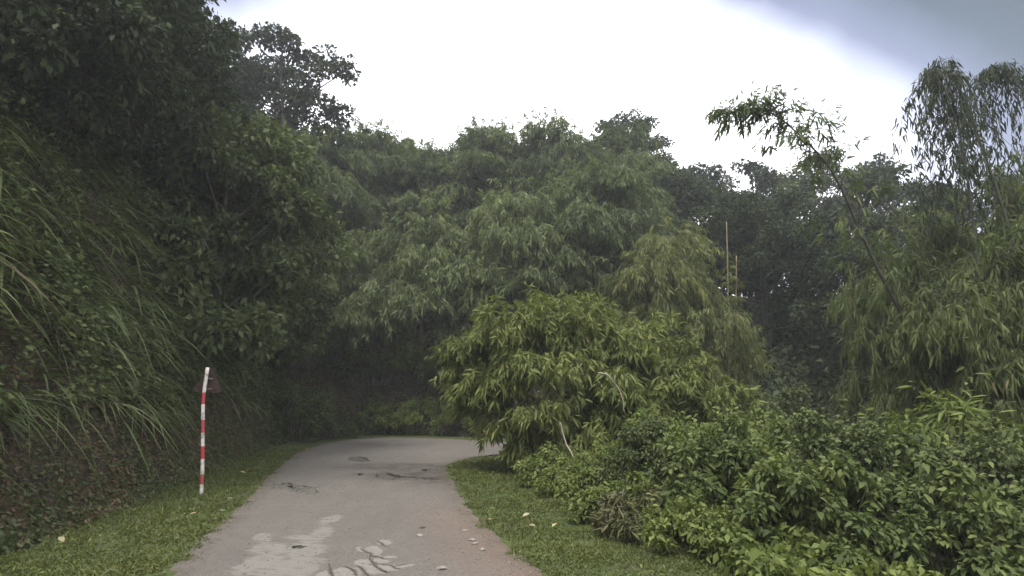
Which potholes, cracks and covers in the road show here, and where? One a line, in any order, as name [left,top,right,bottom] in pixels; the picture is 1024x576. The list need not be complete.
pothole [375,472,441,480]
crack [328,541,405,576]
pothole [273,482,321,494]
